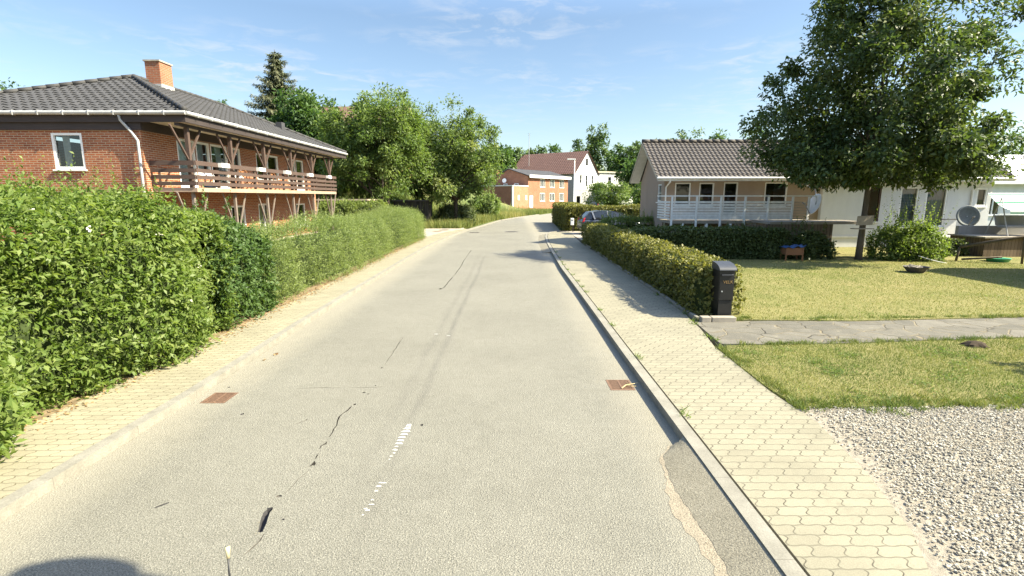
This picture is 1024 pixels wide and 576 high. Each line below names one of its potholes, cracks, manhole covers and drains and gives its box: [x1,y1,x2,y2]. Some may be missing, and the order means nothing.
drain grate [606,380,635,390]
crack [276,385,376,497]
drain grate [200,392,239,403]
